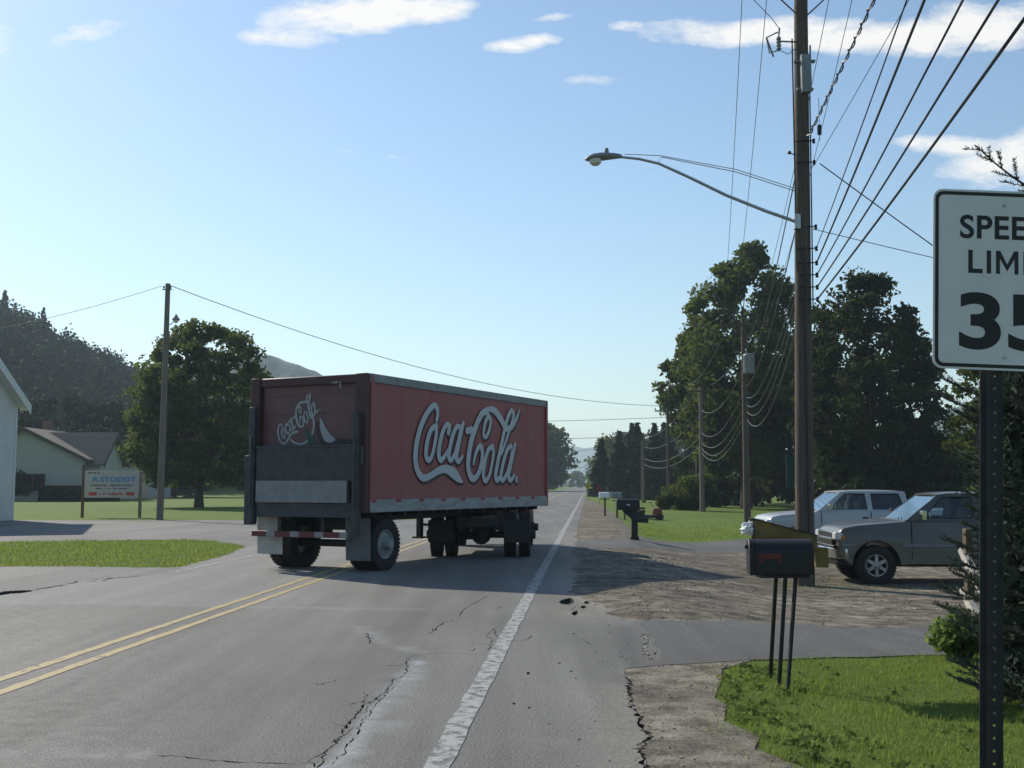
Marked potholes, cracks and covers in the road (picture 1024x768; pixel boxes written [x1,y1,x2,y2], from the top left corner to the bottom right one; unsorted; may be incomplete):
crack [625,676,654,768]
crack [308,657,410,766]
